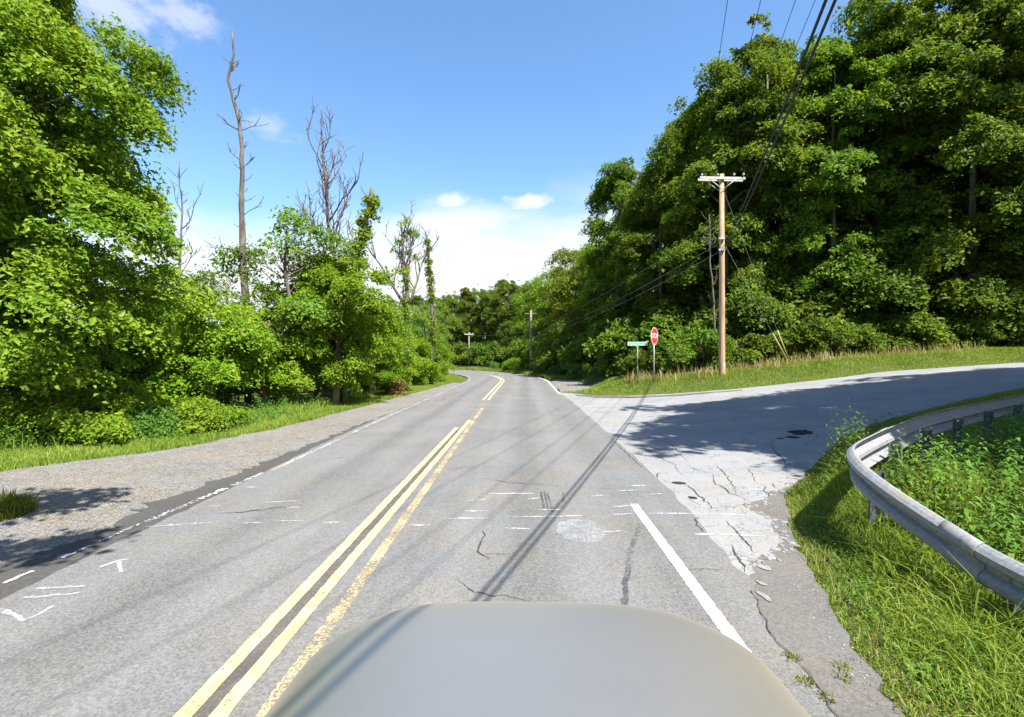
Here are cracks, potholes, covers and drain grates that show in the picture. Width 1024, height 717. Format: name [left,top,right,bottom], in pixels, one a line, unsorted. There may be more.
crack [580,433,775,571]
